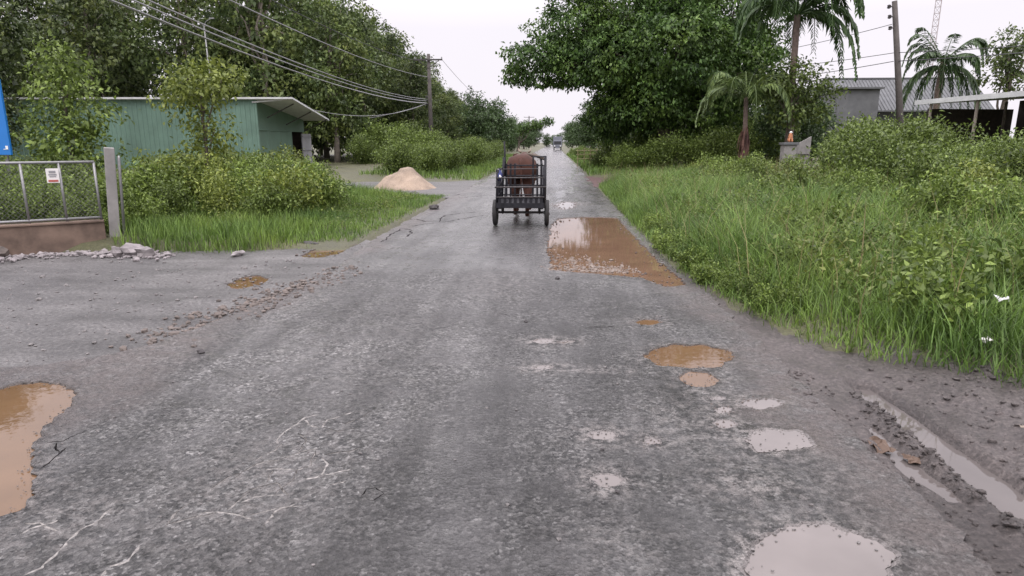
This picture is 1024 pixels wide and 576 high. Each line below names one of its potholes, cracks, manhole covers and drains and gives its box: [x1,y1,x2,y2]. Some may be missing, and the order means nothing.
crack [21,509,111,576]
pothole [643,342,737,368]
pothole [733,517,904,576]
pothole [677,370,720,387]
crack [381,195,492,242]
pothole [217,273,273,289]
pothole [295,244,361,258]
pothole [590,470,629,490]
crack [101,545,141,576]
pothole [0,381,83,518]
pothole [540,216,687,288]
crack [40,431,85,469]
